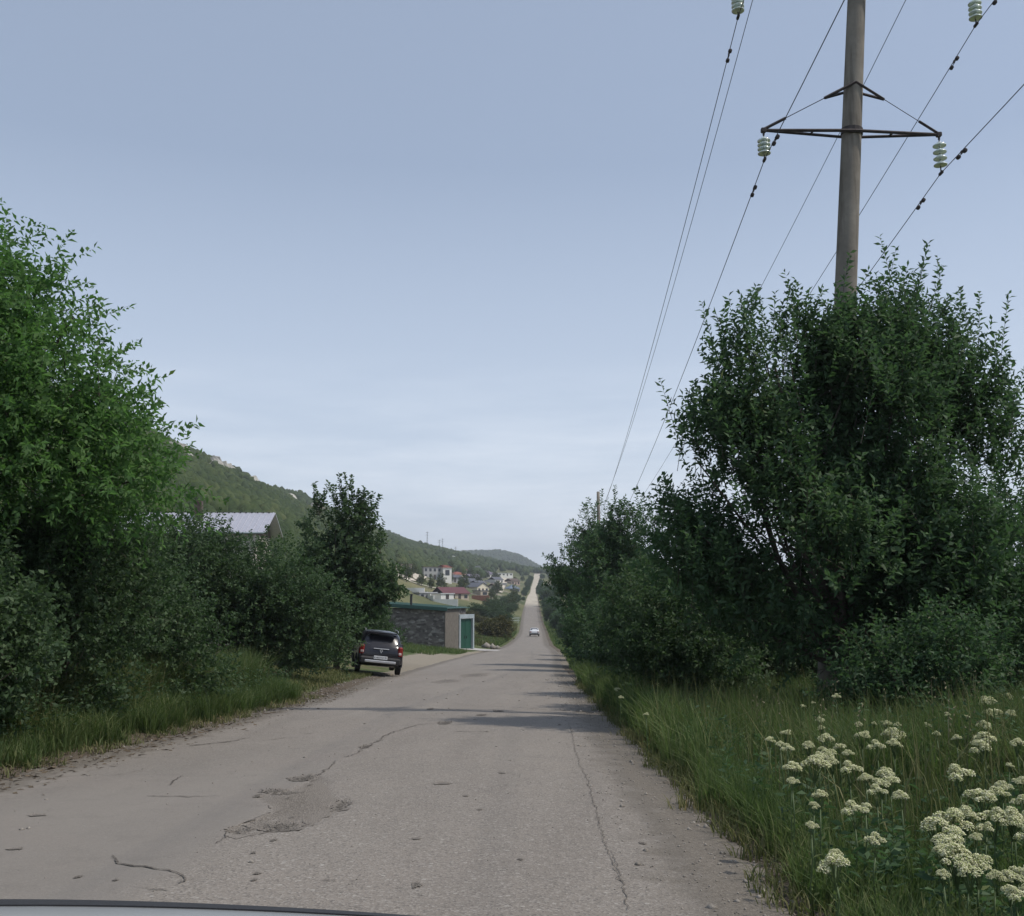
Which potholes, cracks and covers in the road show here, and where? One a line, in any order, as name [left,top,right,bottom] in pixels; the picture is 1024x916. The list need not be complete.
pothole [286,773,321,781]
crack [113,856,187,890]
pothole [225,776,349,839]
